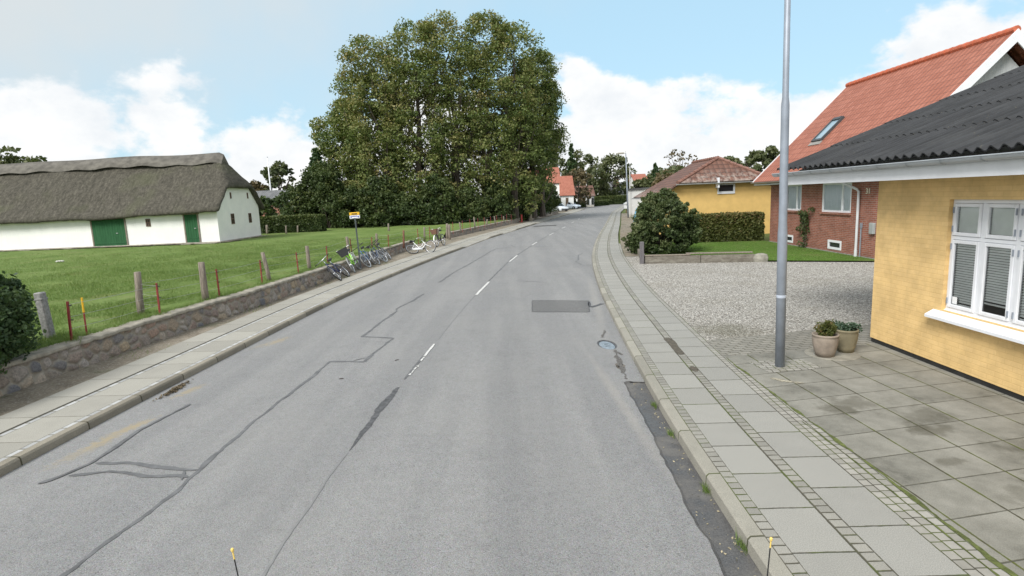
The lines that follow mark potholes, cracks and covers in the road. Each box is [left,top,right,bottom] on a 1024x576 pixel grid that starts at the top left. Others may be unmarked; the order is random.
crack [600,330,628,379]
crack [262,297,474,576]
manhole cover [597,340,617,349]
